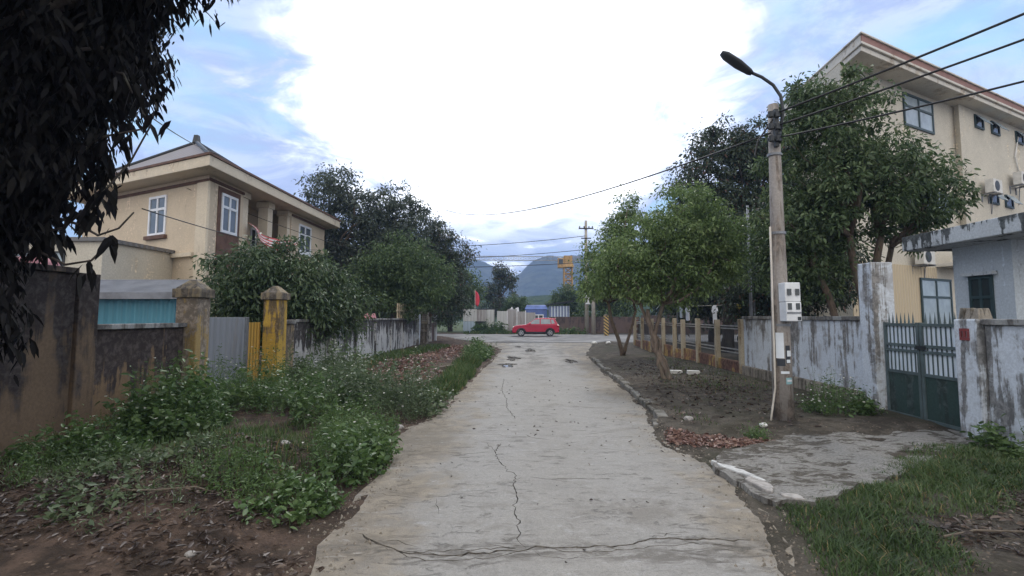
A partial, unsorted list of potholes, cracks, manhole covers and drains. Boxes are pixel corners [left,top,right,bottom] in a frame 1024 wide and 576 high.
crack [359,433,761,561]
